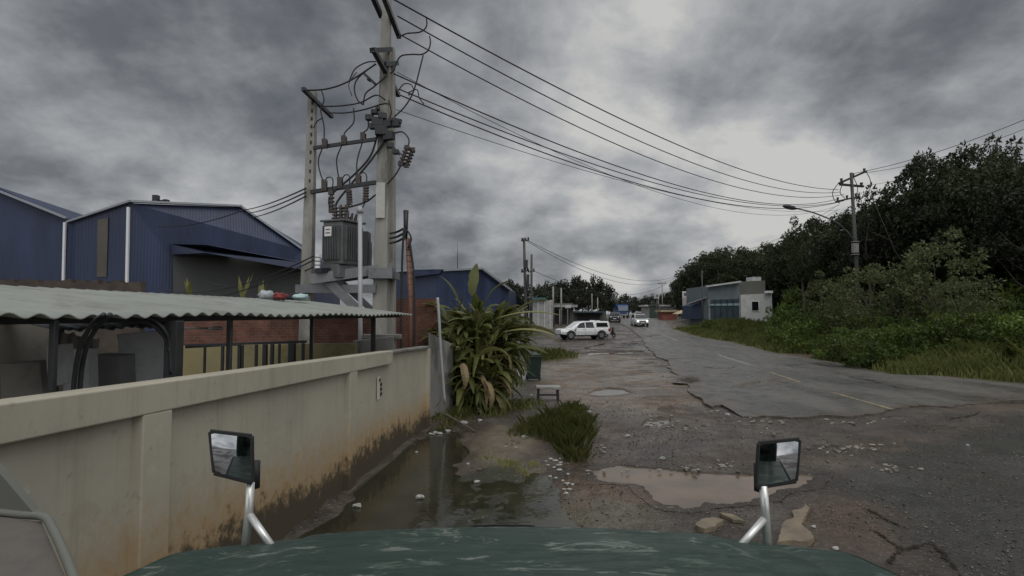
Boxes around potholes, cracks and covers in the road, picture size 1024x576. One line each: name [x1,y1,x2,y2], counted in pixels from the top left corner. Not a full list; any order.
crack [864,508,958,570]
pothole [567,461,833,513]
pothole [673,376,704,384]
pothole [579,387,637,397]
